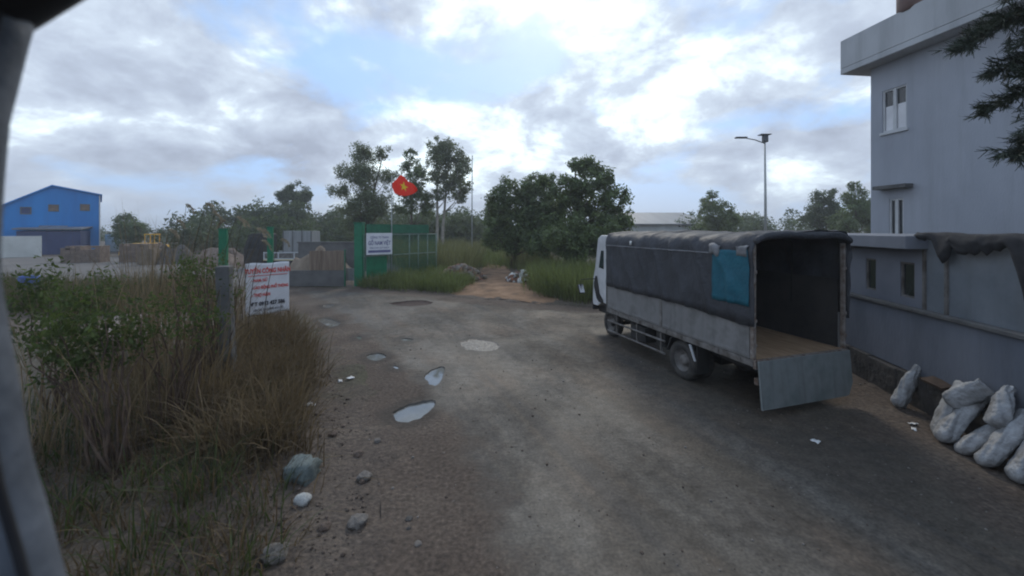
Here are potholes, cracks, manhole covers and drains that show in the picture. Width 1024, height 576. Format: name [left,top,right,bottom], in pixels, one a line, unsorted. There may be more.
pothole [392,400,436,422]
pothole [366,353,386,361]
pothole [318,318,340,326]
pothole [425,366,445,386]
